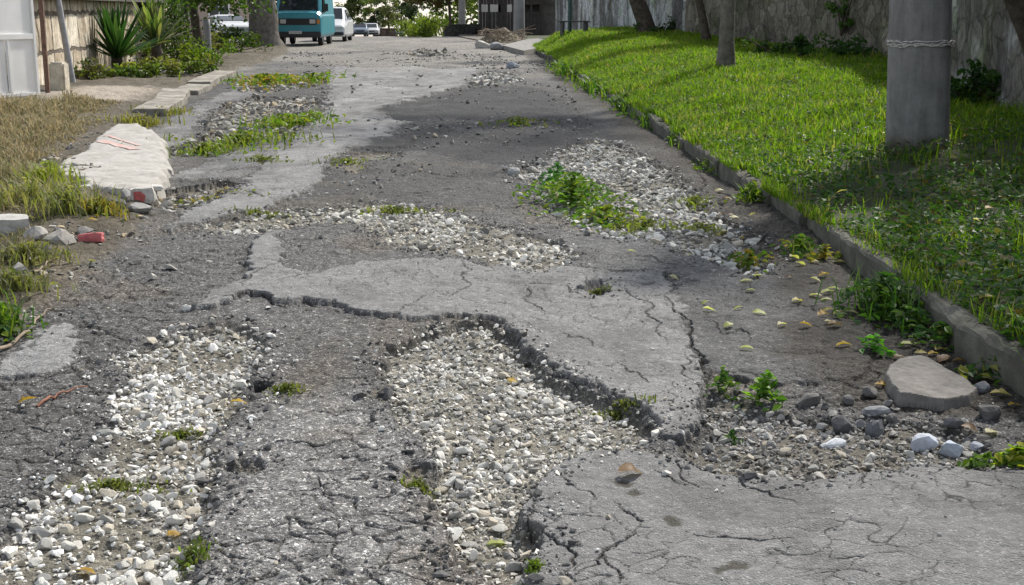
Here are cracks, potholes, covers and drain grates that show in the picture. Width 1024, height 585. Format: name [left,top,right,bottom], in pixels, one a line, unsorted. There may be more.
pothole [0,313,301,585]
crack [684,531,795,542]
pothole [346,310,685,585]
crack [858,474,866,489]
crack [228,436,350,450]
pothole [222,72,336,93]
crack [649,452,799,503]
pothole [494,138,802,279]
crack [526,470,651,583]
pothole [181,200,600,273]
pothole [167,92,337,157]
